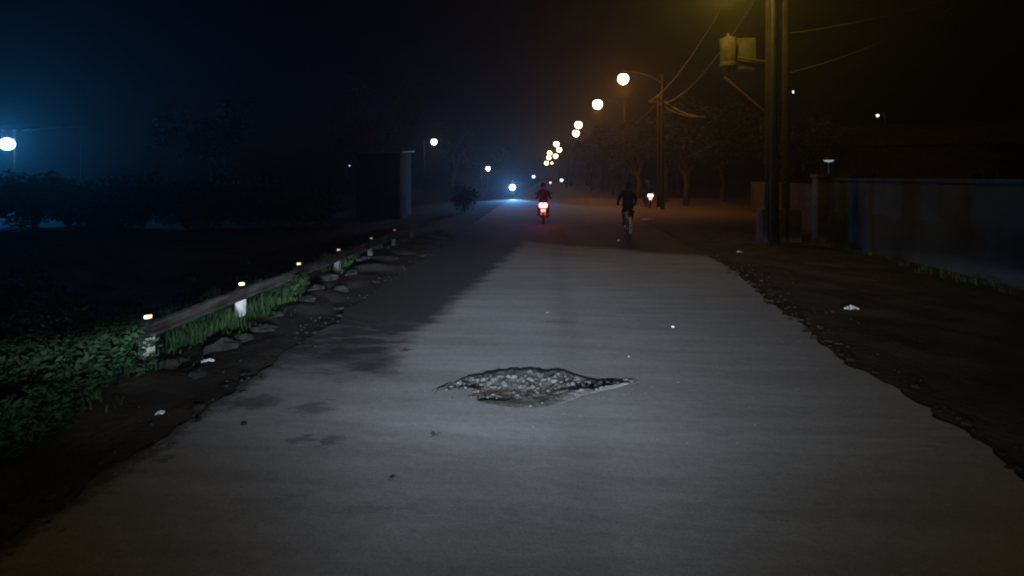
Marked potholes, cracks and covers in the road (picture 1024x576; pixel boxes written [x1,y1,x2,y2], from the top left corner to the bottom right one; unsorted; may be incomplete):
pothole [432,366,638,408]
